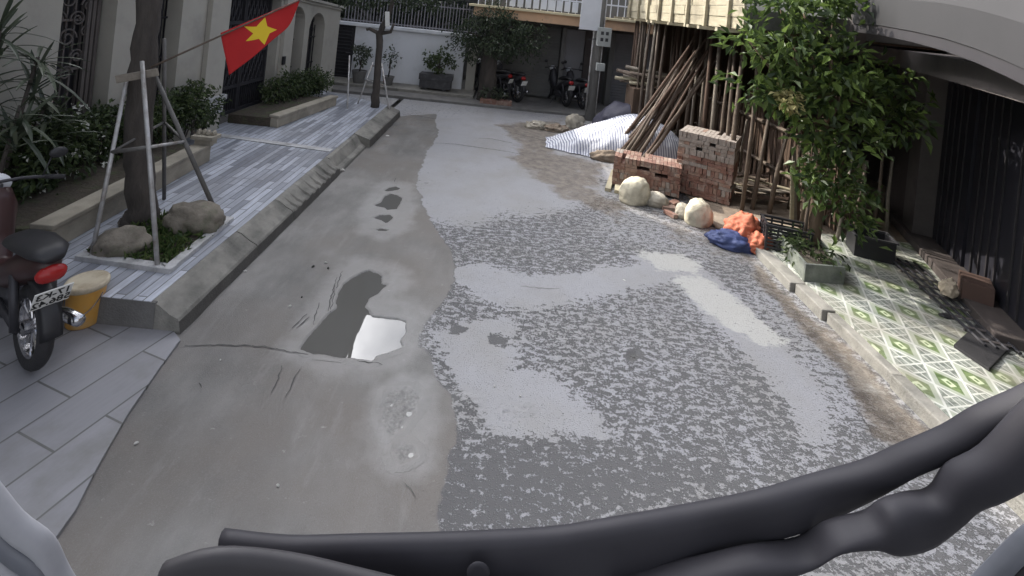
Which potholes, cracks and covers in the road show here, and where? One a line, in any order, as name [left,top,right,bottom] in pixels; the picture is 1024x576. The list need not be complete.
pothole [291,266,415,368]
pothole [379,184,406,193]
pothole [367,212,399,226]
pothole [369,192,407,212]
